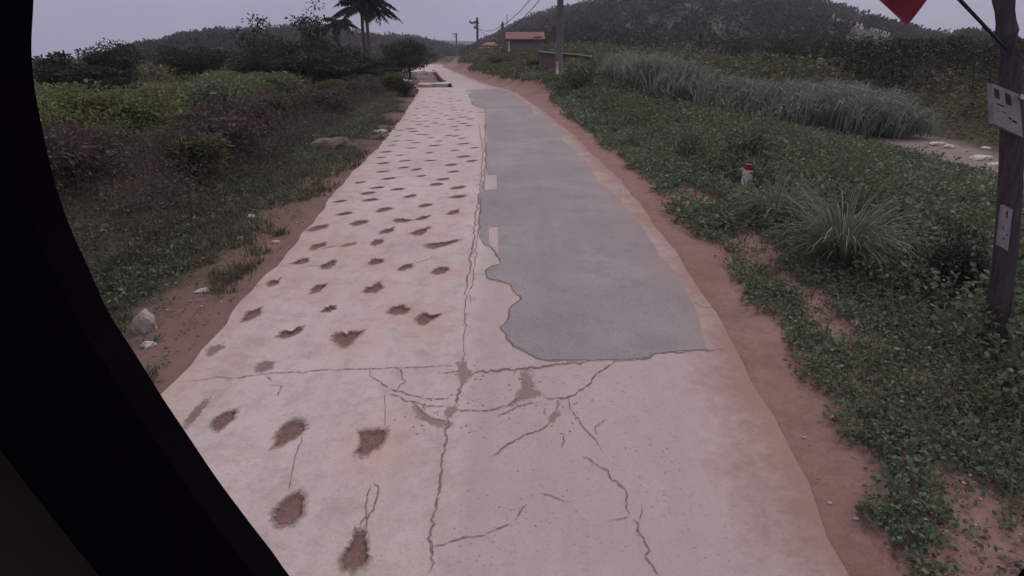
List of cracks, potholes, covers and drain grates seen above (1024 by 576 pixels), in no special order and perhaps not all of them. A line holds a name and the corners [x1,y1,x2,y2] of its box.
crack [369,367,524,573]
pothole [339,528,370,574]
pothole [387,304,411,314]
pothole [276,326,303,338]
crack [468,94,487,190]
pothole [355,427,389,457]
pothole [211,409,237,432]
pothole [331,330,364,347]
pothole [270,418,308,450]
pothole [271,490,306,528]
pothole [415,312,442,325]
